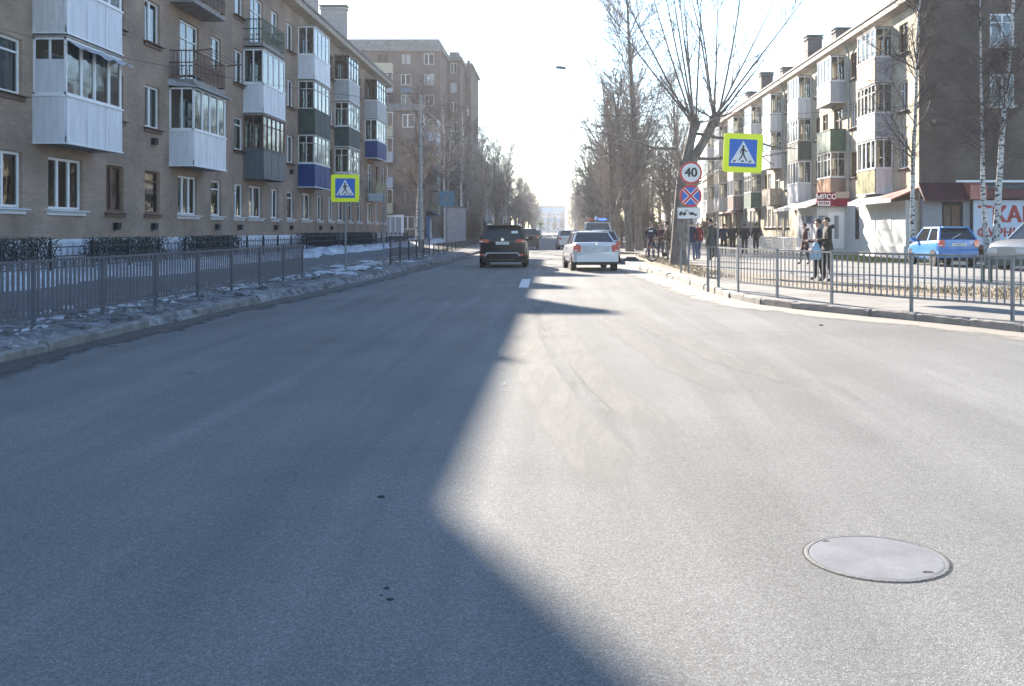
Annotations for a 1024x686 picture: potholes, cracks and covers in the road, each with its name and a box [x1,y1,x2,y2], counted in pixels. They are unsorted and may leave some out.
manhole cover [802,535,953,583]
